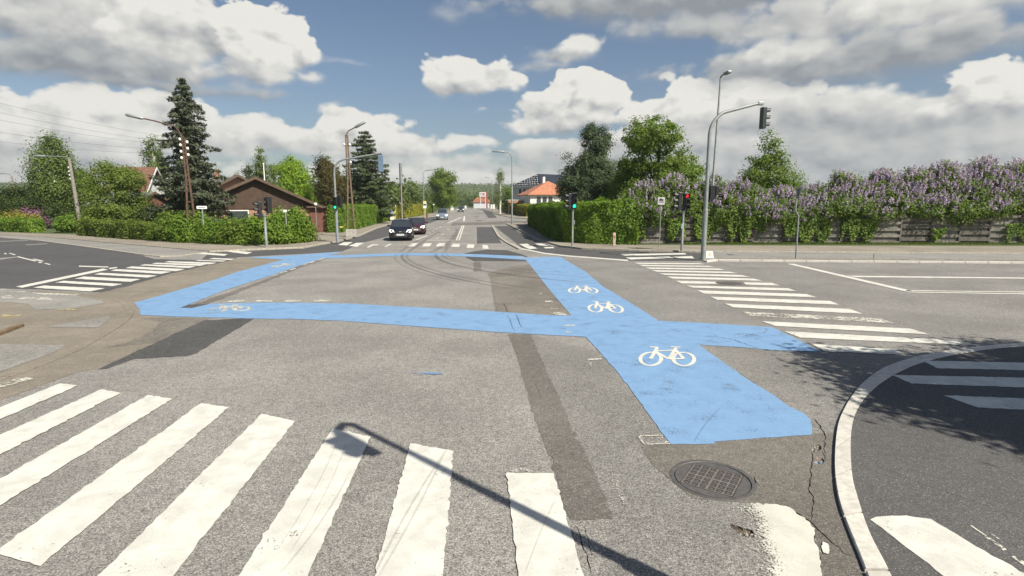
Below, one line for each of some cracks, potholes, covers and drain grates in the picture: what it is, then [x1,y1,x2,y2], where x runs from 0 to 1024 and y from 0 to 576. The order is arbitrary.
manhole cover [670,460,757,501]
crack [797,420,856,562]
